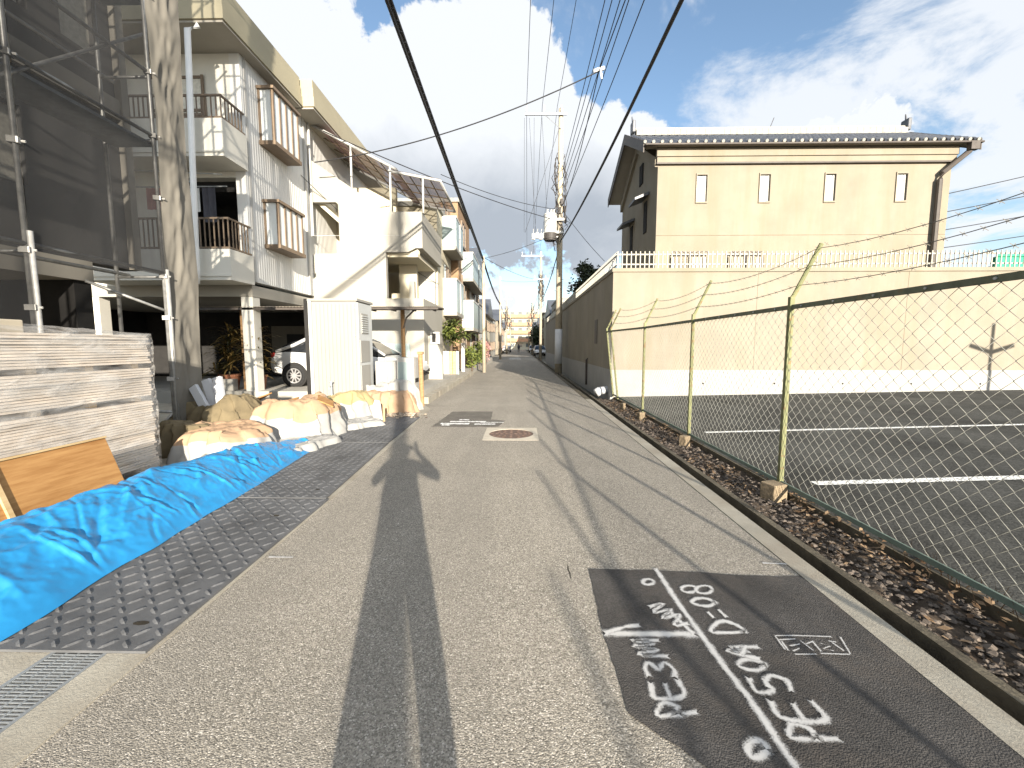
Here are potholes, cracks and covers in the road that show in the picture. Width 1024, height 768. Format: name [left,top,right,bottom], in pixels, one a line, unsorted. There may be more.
drain grate [0,653,107,733]
manhole cover [482,428,539,440]
